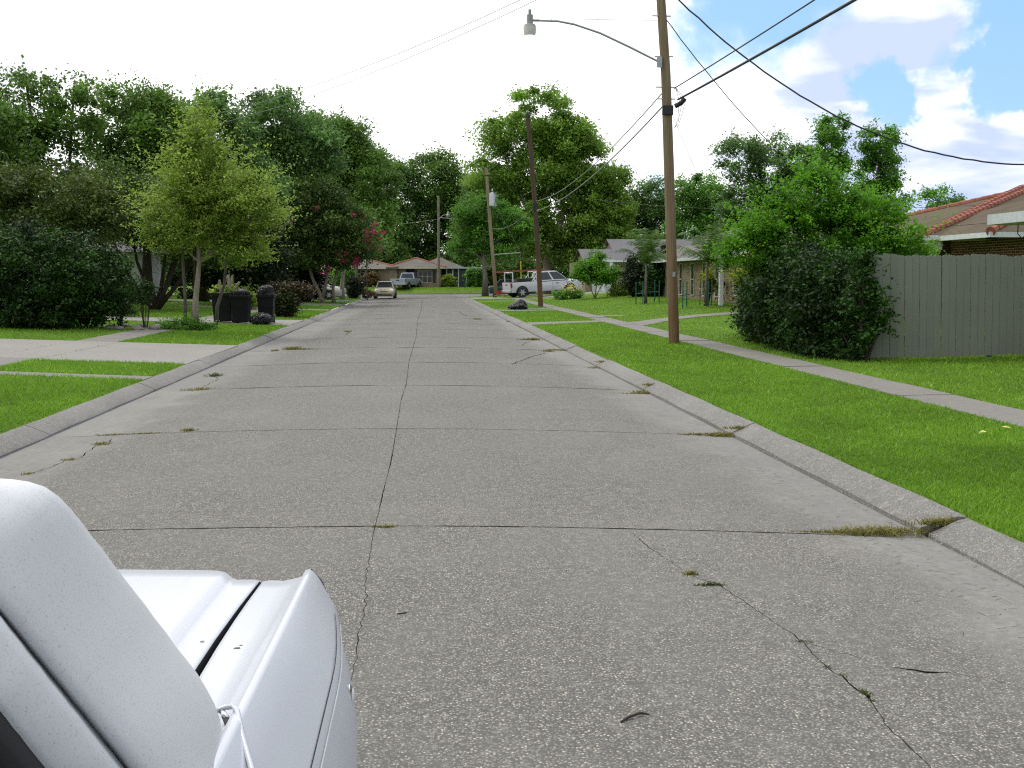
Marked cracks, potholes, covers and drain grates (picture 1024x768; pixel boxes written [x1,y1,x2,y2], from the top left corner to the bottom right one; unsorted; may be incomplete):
crack [634,534,931,768]
crack [351,301,423,680]
